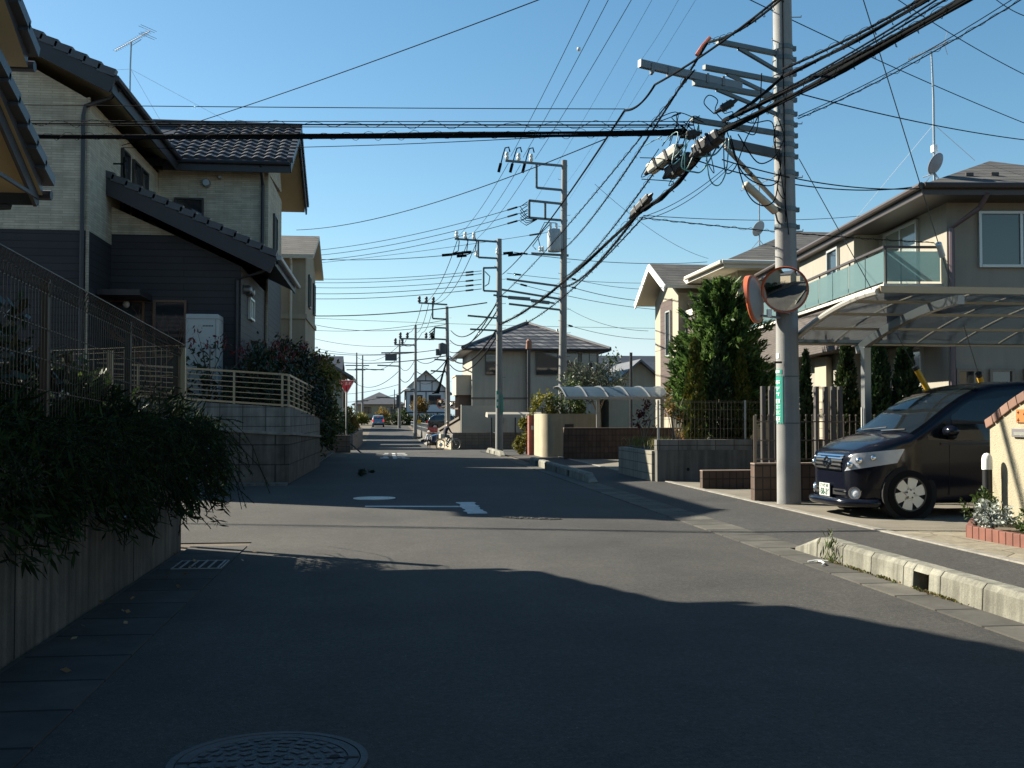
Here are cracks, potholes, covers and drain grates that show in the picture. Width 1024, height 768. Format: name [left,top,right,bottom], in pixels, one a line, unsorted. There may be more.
drain grate [171,560,230,569]
manhole cover [165,731,368,768]
